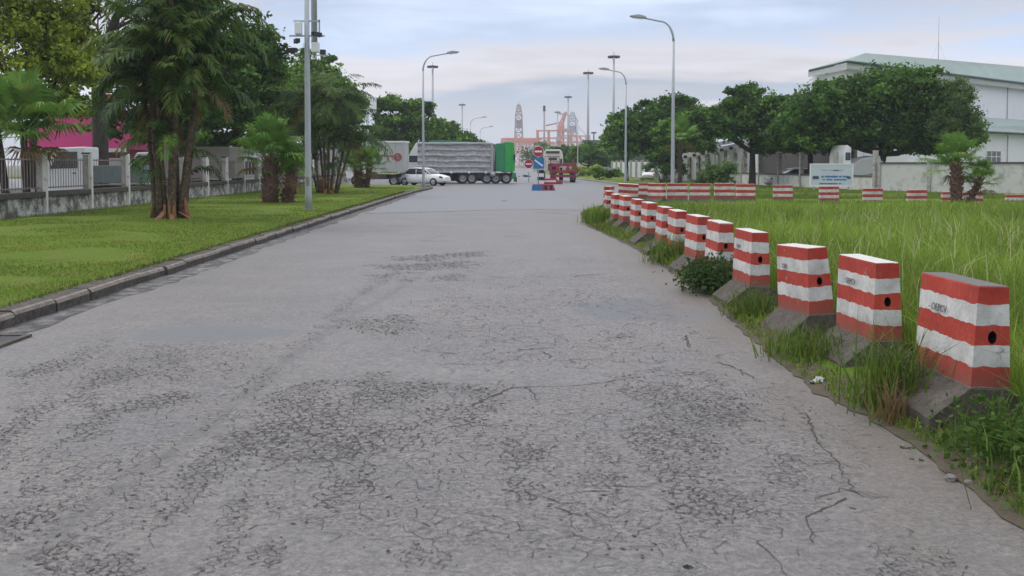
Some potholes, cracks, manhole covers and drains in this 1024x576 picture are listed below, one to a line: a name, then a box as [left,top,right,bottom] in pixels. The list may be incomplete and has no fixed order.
drain grate [0,334,32,348]
crack [0,256,889,576]
crack [364,225,493,282]
